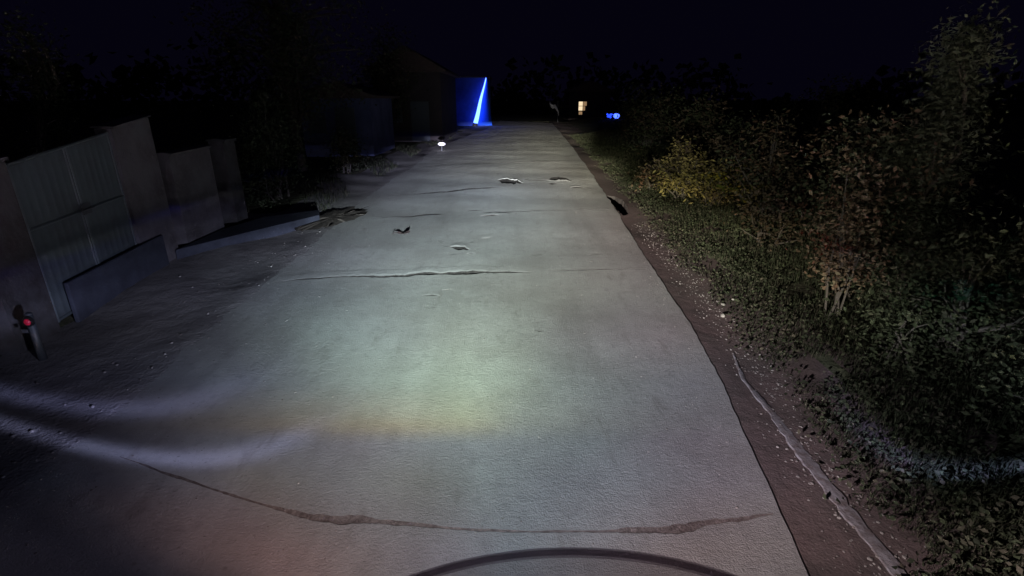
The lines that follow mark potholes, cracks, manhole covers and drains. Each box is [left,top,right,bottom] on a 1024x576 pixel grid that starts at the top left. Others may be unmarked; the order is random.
crack [359,206,450,218]
crack [398,187,496,195]
pothole [607,196,628,216]
pothole [498,177,523,185]
